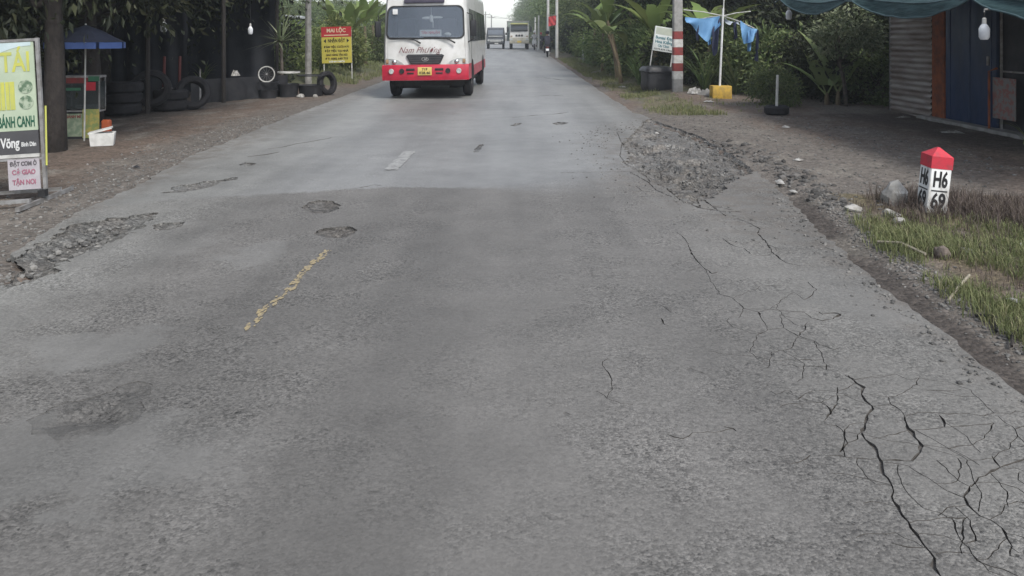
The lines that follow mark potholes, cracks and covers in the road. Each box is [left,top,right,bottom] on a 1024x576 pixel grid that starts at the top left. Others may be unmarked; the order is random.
pothole [621,119,753,205]
pothole [163,177,236,193]
crack [704,268,1024,576]
crack [667,426,736,439]
pothole [314,226,357,238]
pothole [301,200,341,213]
crack [672,233,717,274]
pothole [5,212,158,288]
pothole [152,222,185,231]
crack [597,358,633,405]
